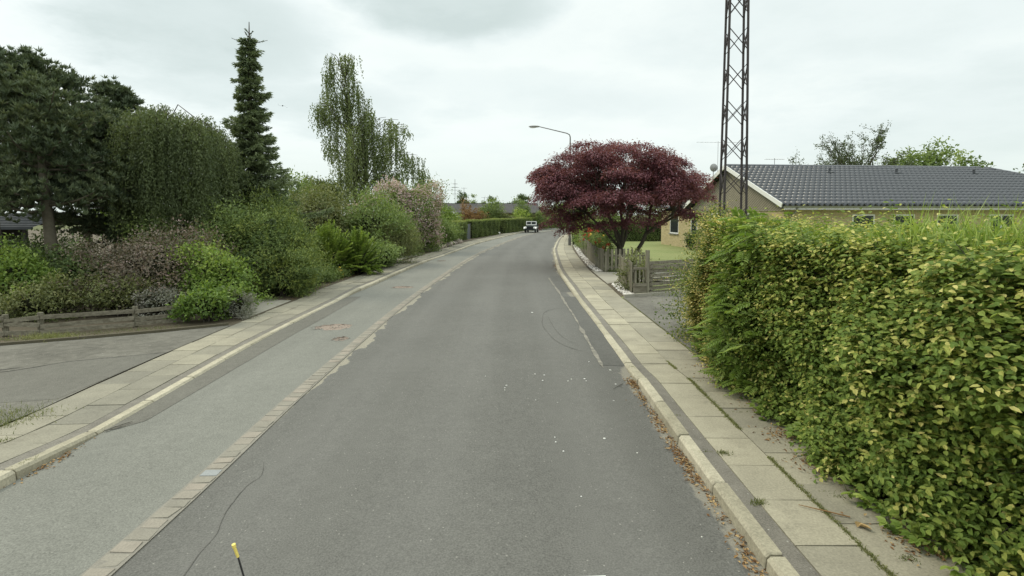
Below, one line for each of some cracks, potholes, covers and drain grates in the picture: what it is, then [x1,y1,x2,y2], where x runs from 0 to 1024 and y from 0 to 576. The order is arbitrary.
crack [183,464,264,576]
